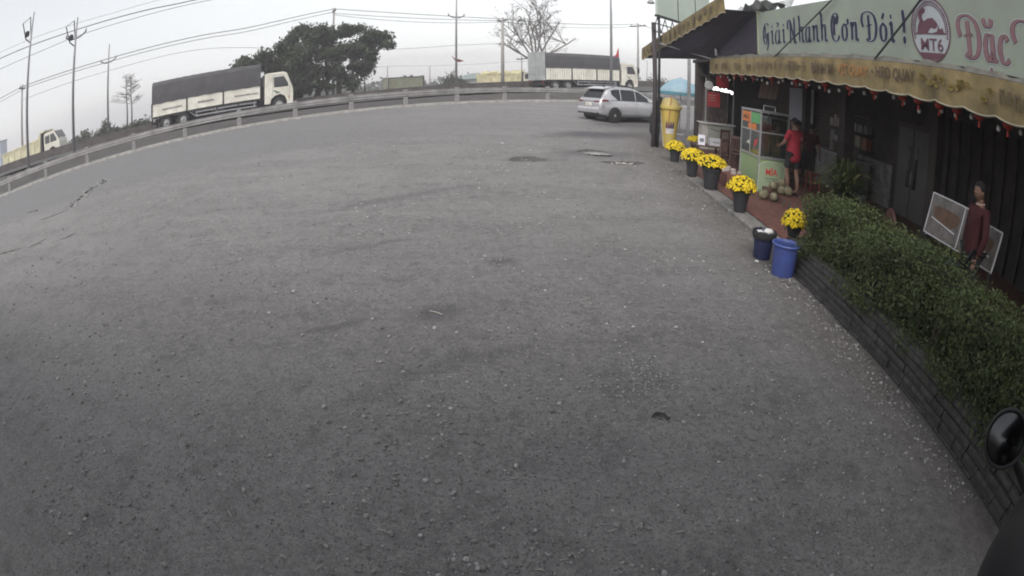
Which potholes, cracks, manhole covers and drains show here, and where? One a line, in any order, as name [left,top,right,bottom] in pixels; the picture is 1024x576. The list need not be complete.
crack [28,178,111,220]
pothole [651,412,671,421]
